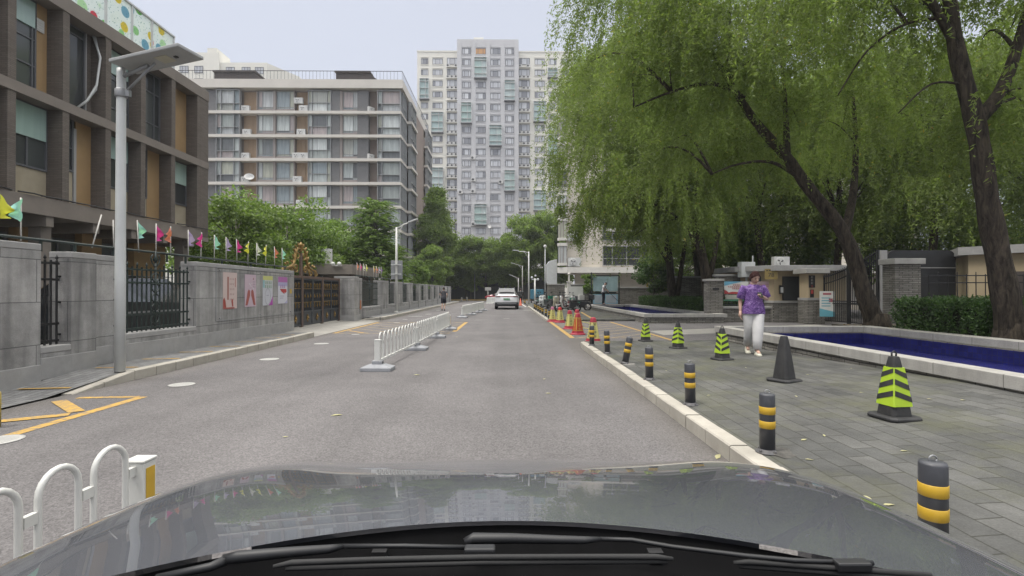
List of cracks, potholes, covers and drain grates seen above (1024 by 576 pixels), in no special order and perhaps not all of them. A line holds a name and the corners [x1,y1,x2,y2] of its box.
manhole cover [0,434,26,444]
